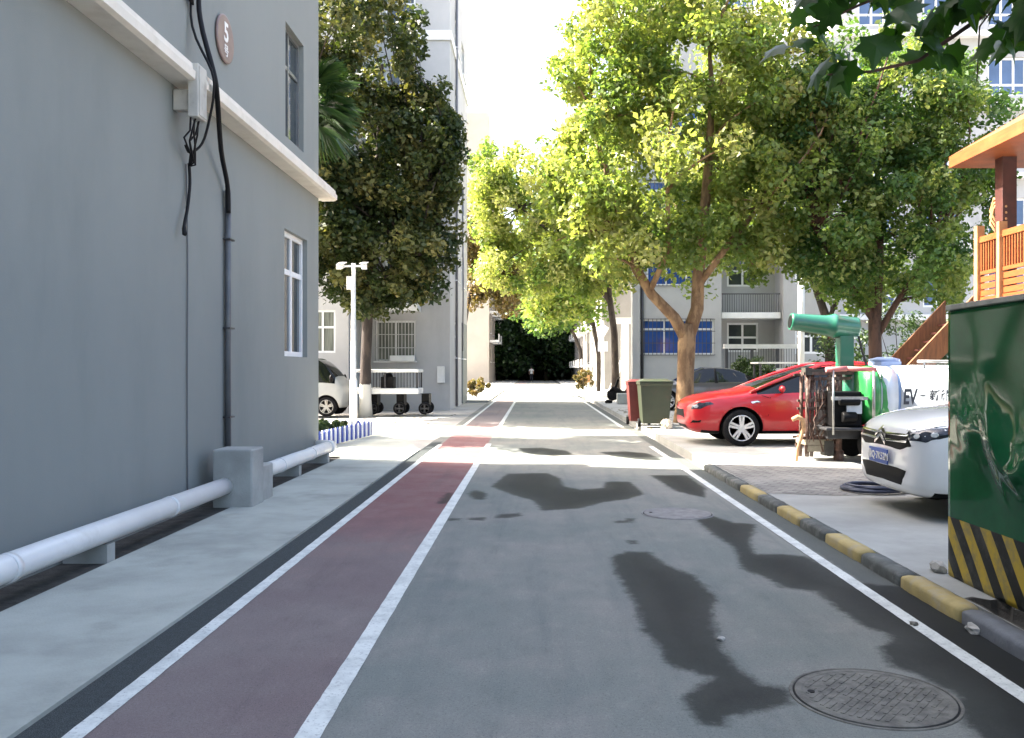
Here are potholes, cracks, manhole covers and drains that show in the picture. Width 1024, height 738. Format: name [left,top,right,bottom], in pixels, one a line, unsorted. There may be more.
manhole cover [641,508,714,520]
manhole cover [789,668,965,731]
